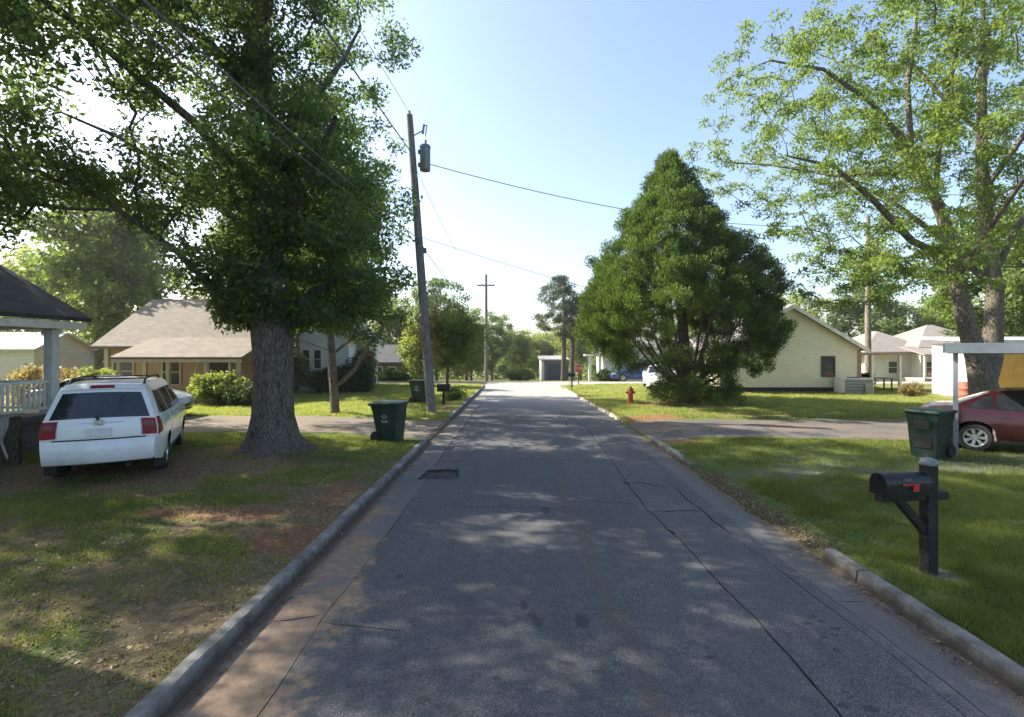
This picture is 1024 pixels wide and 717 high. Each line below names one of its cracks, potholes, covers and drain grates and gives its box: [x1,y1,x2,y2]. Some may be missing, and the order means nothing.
crack [270,615,403,631]
pothole [418,469,459,480]
